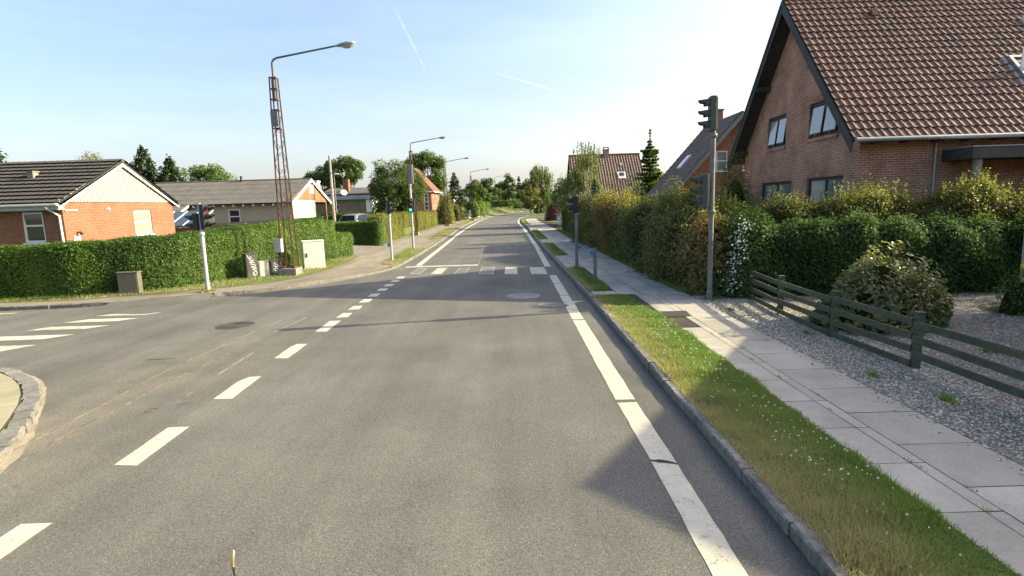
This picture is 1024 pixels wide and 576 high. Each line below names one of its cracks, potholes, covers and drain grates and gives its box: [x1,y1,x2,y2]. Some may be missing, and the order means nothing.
manhole cover [215,321,255,329]
